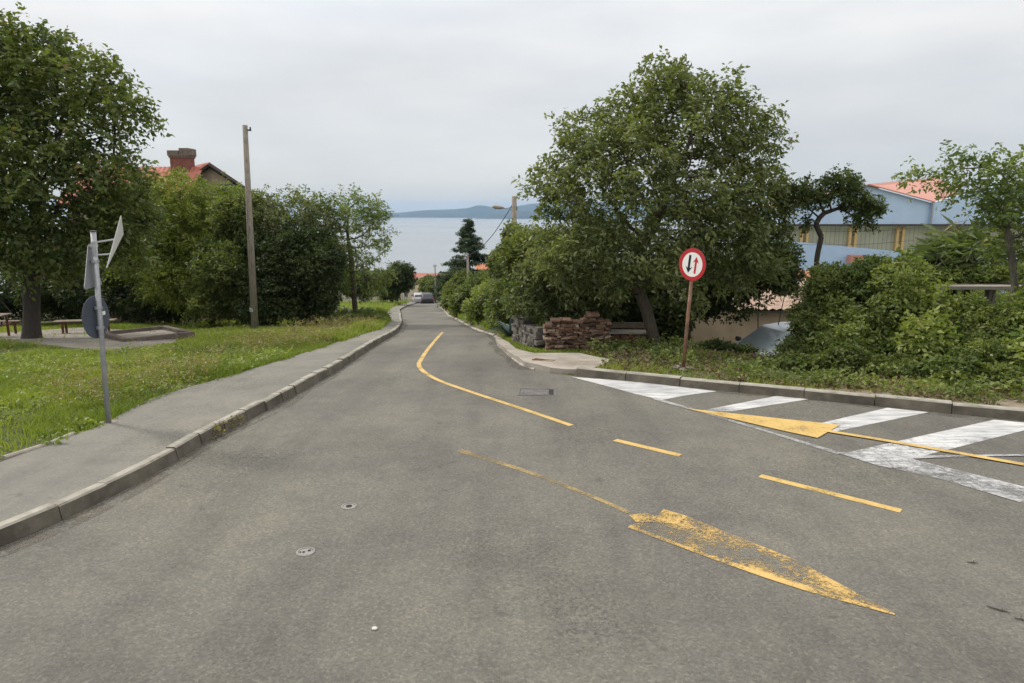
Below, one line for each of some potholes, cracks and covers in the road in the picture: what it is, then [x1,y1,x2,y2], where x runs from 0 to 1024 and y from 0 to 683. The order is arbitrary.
utility cover [296,547,315,556]
